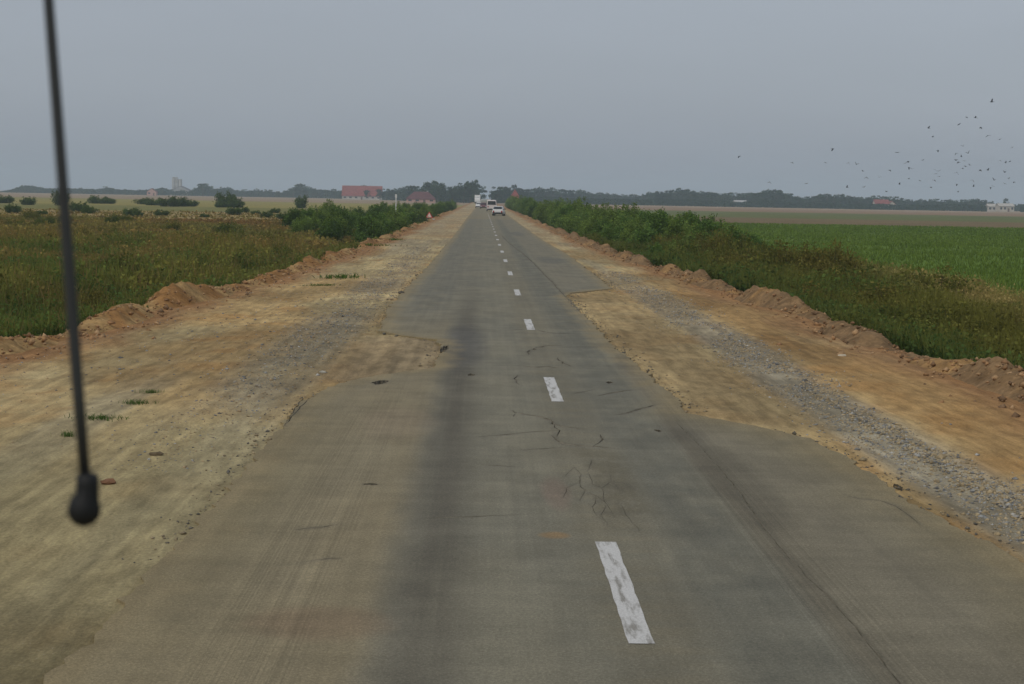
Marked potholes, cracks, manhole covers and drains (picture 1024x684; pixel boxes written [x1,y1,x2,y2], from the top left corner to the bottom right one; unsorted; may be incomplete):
crack [580,390,653,415]
crack [507,330,570,384]
crack [482,411,639,530]
